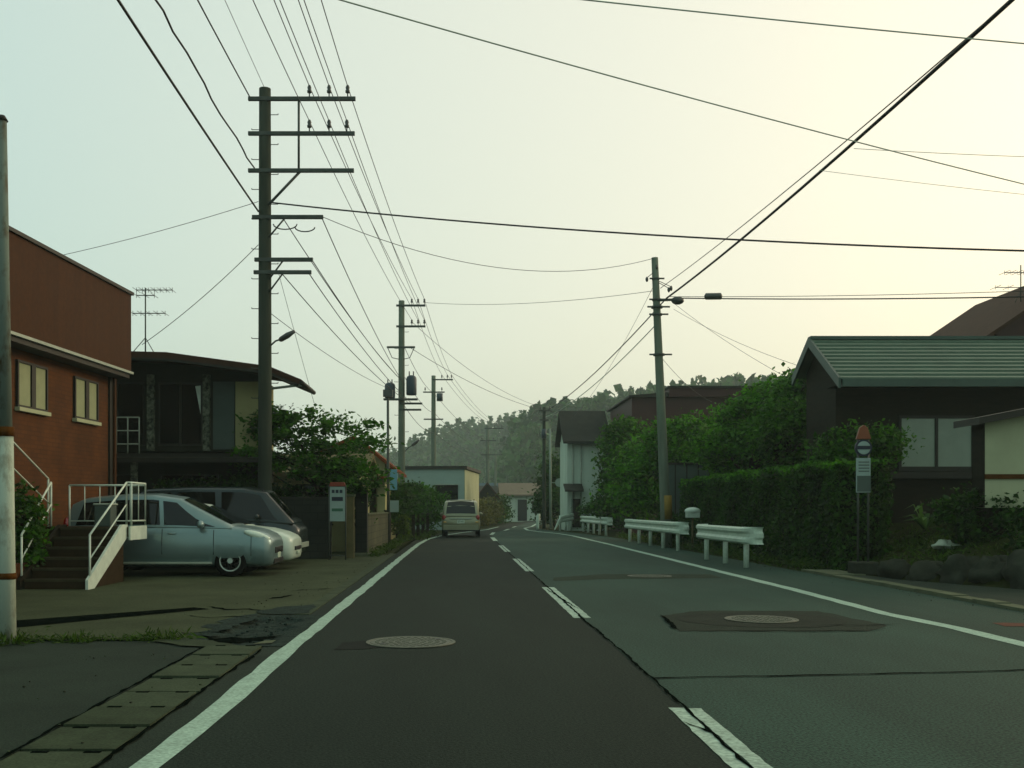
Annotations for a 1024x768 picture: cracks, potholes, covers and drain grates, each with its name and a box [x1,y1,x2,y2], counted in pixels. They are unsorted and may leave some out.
pothole [197,615,323,647]
manhole cover [366,636,456,648]
manhole cover [724,615,799,623]
